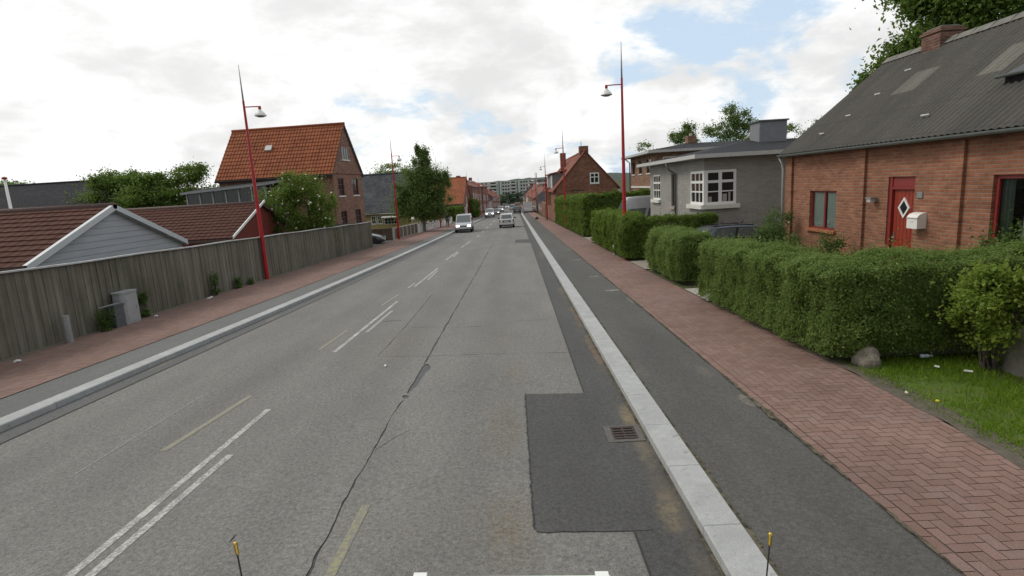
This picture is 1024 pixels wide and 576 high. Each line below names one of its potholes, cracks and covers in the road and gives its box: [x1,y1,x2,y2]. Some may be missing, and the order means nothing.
crack [306,249,569,576]
pothole [407,364,431,393]
